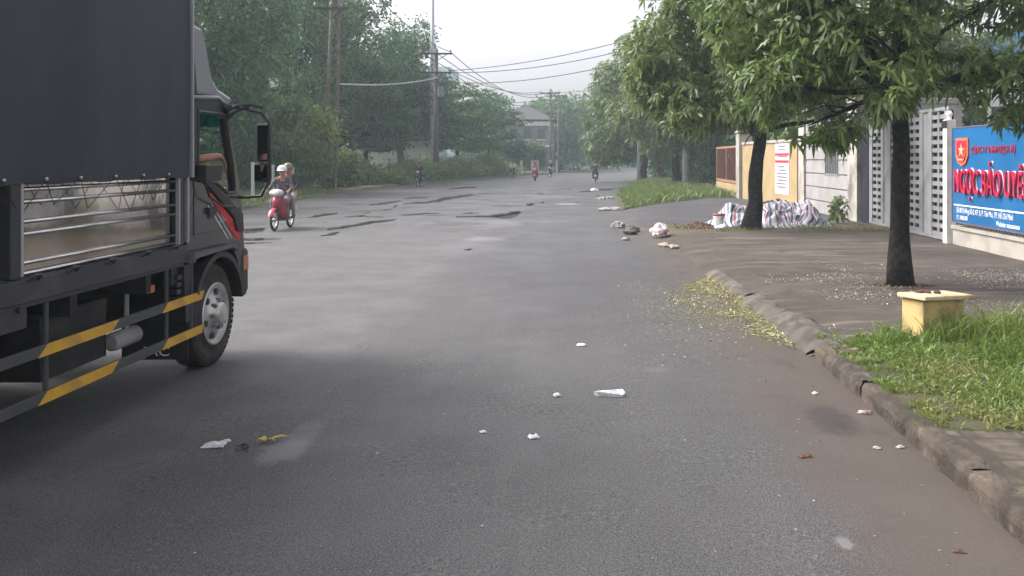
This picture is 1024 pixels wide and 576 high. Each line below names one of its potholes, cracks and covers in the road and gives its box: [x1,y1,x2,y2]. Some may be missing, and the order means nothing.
pothole [403,194,475,204]
pothole [455,211,523,219]
pothole [326,219,396,230]
